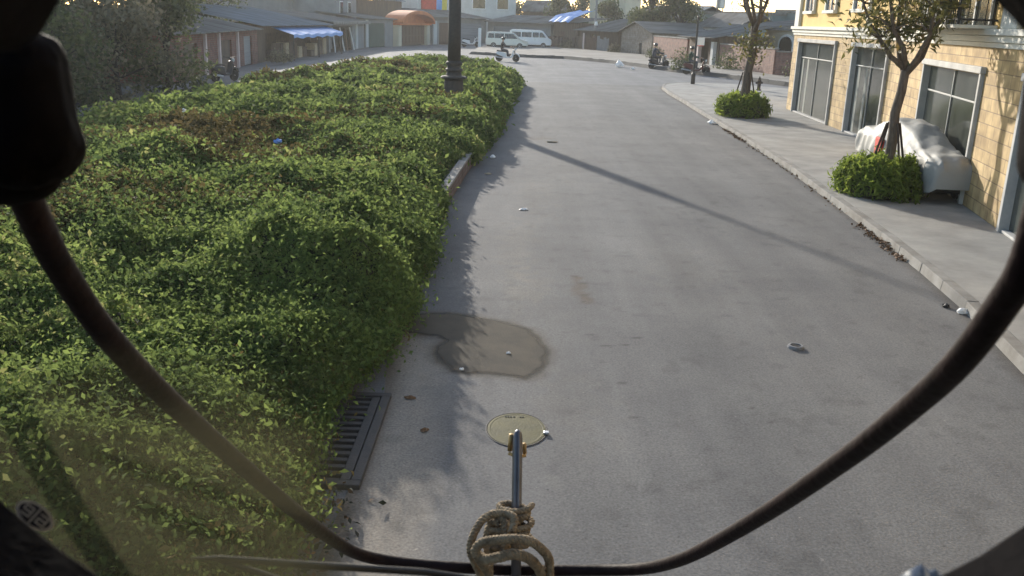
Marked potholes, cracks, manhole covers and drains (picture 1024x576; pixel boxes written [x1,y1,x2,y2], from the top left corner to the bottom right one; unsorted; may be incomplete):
drain grate [305,392,391,490]
manhole cover [485,413,549,447]
